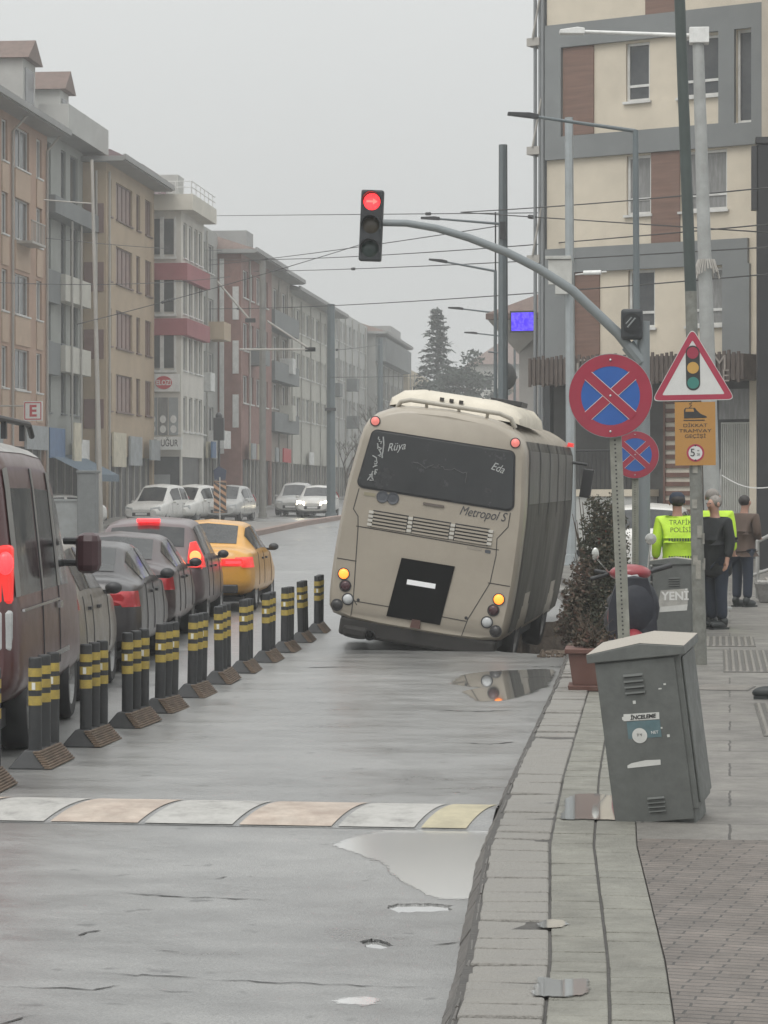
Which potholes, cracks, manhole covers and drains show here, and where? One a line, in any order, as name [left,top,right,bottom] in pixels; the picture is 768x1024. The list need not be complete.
pothole [360,938,393,949]
pothole [500,621,579,658]
pothole [387,903,453,913]
crack [5,973,422,992]
